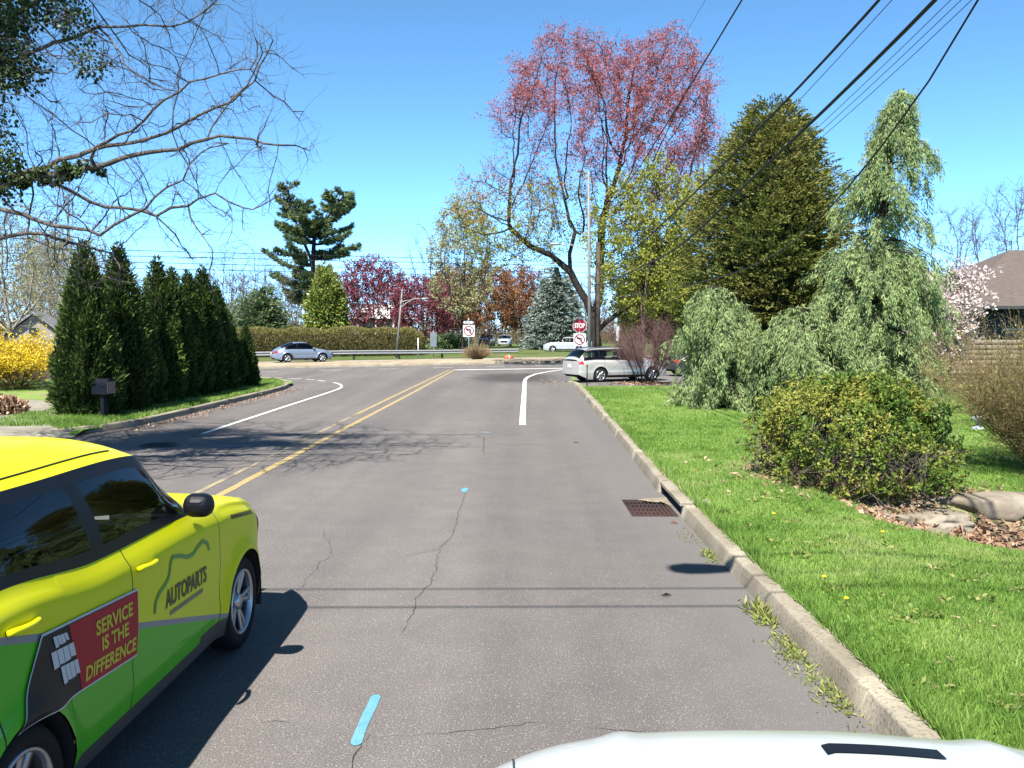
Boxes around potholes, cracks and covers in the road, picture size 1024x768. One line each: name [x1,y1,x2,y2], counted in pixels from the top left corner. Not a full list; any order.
crack [404,494,465,629]
crack [352,722,537,768]
drain grate [622,481,710,517]
